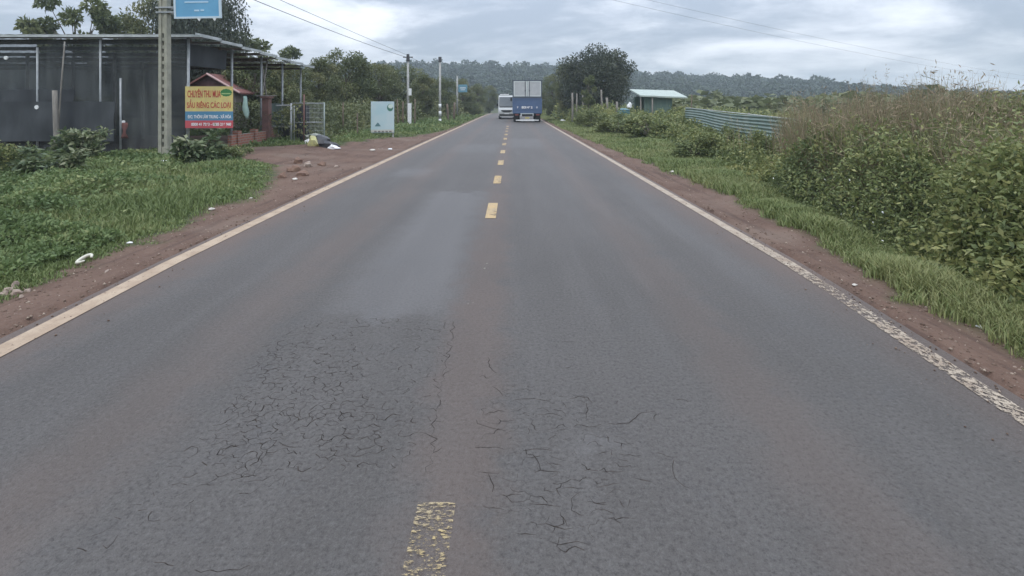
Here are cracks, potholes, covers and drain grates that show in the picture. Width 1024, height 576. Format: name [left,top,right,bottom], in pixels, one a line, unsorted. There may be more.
crack [421,322,455,470]
crack [475,341,655,552]
